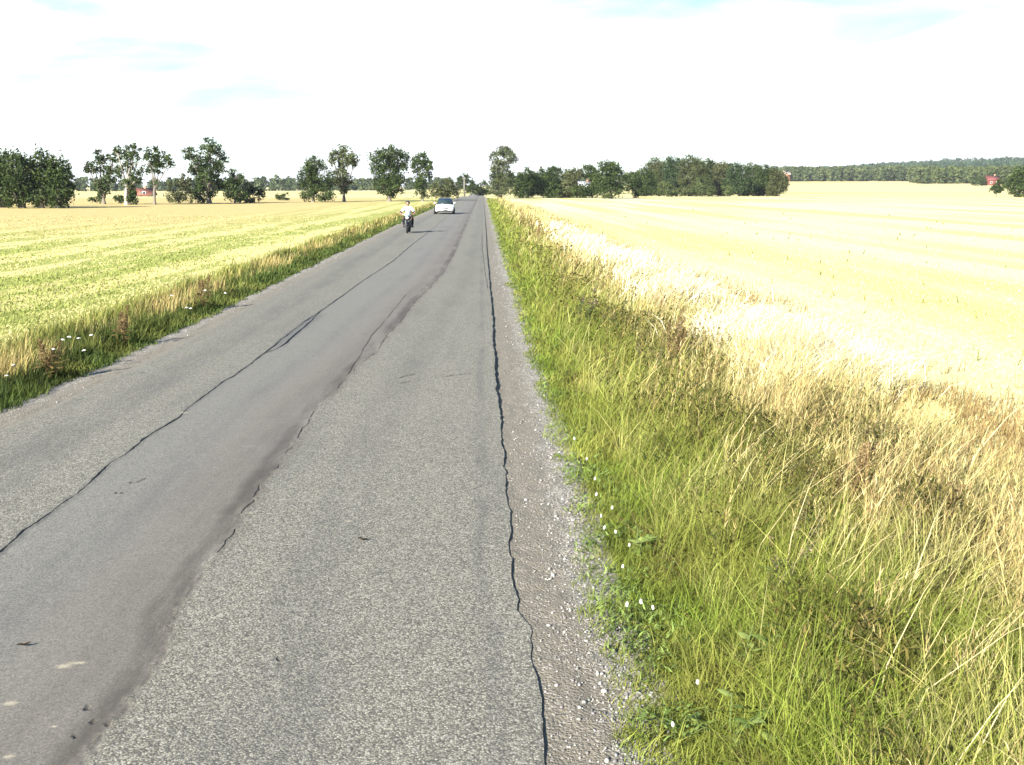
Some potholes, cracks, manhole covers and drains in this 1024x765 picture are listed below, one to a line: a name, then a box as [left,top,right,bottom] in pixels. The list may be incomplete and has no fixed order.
crack [0,231,430,553]
crack [482,235,545,764]
